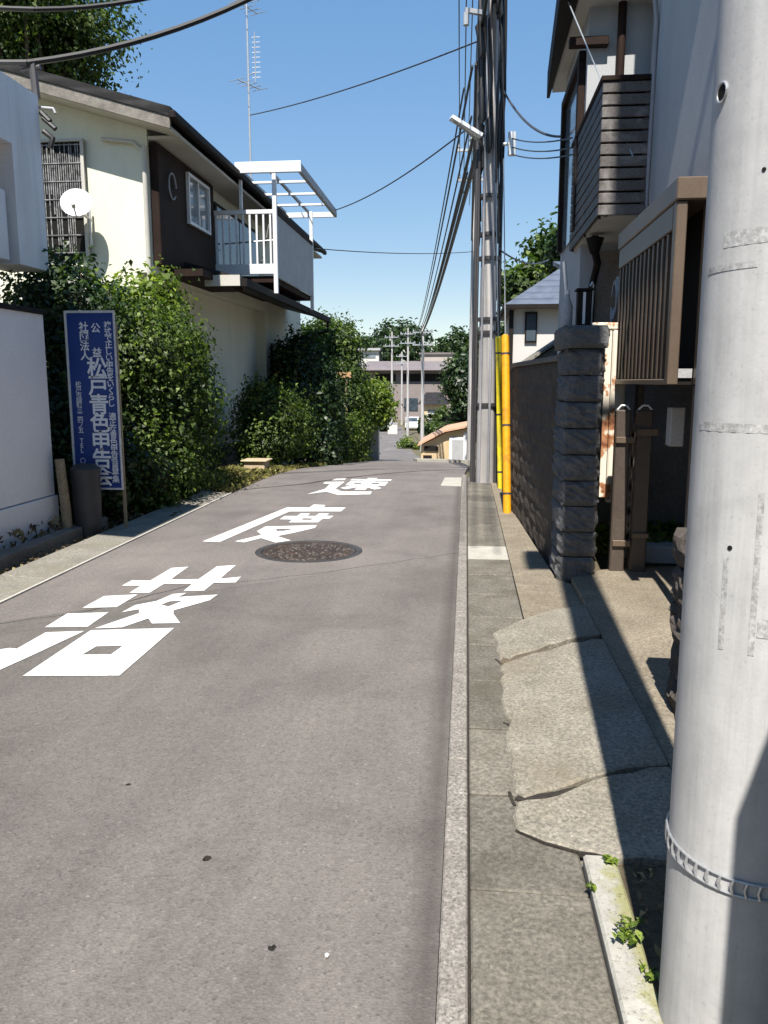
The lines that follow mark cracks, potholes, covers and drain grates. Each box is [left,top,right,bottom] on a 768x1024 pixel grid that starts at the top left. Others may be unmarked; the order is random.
manhole cover [255,540,362,563]
crack [515,786,579,802]
crack [500,647,557,665]
